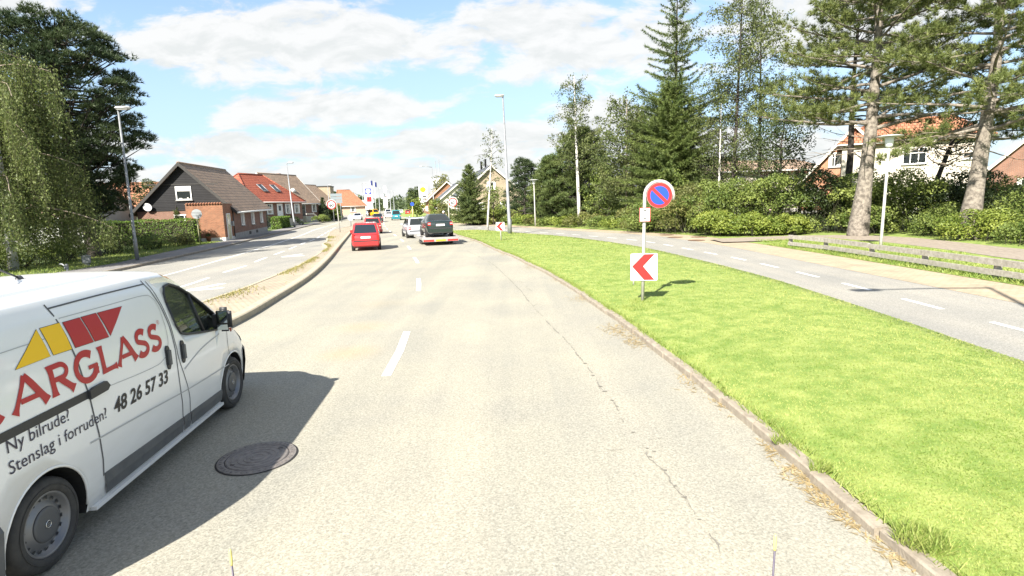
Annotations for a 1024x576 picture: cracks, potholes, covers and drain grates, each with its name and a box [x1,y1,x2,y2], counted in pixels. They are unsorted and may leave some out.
manhole cover [215,441,298,476]
crack [468,251,720,552]
